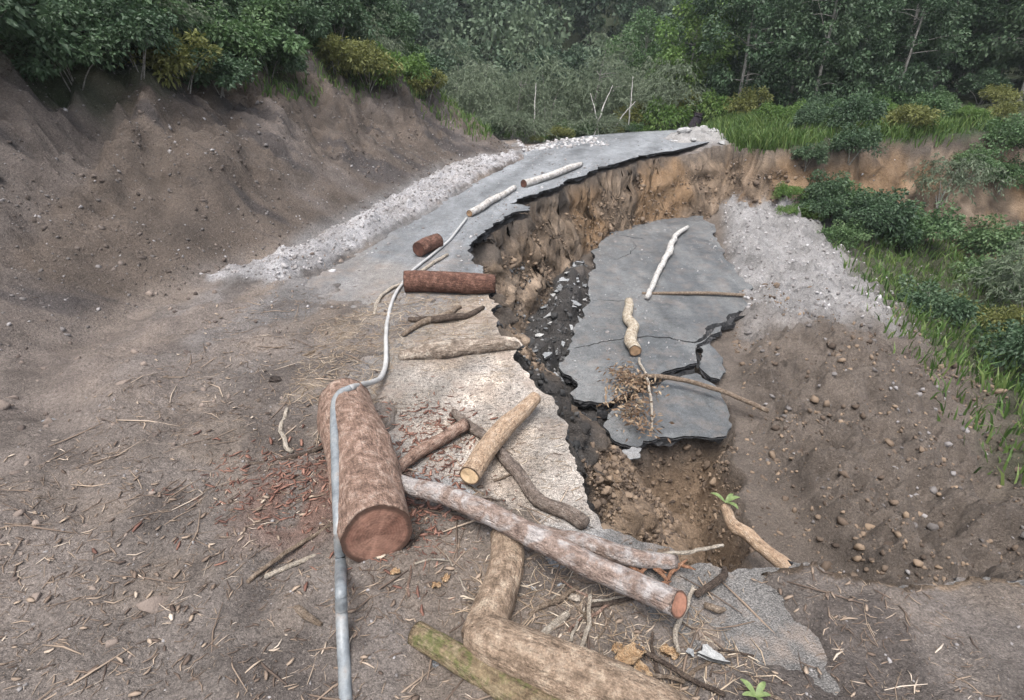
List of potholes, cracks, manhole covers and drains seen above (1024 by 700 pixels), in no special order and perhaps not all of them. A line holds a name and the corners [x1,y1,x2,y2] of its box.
crack [576,312,745,419]
